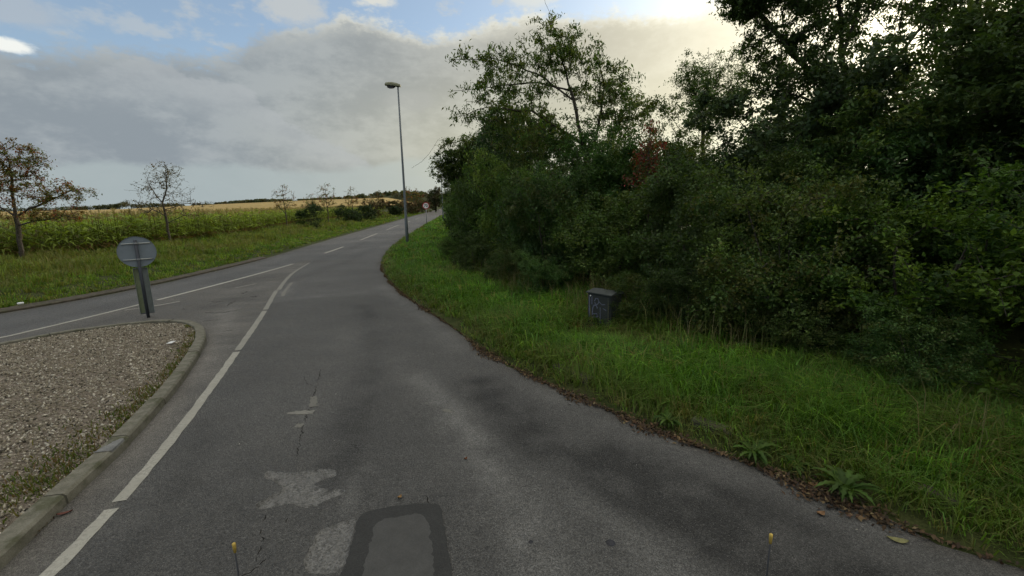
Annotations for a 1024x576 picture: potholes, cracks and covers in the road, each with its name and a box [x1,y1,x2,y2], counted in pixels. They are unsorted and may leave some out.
crack [242,515,300,576]
